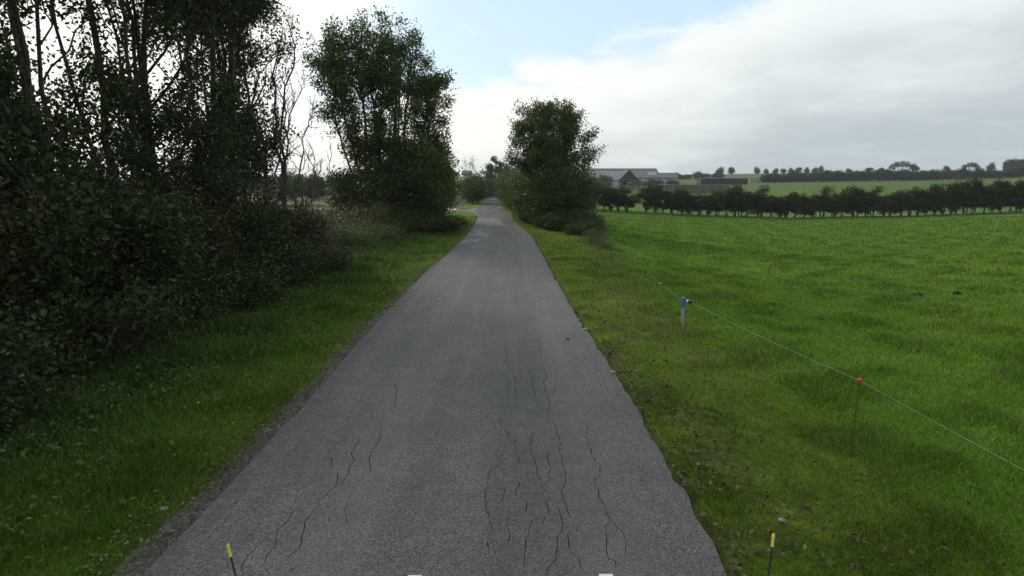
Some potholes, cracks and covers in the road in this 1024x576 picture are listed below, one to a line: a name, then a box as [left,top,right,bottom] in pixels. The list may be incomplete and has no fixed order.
crack [577,421,626,571]
crack [480,340,582,574]
crack [242,382,398,572]
